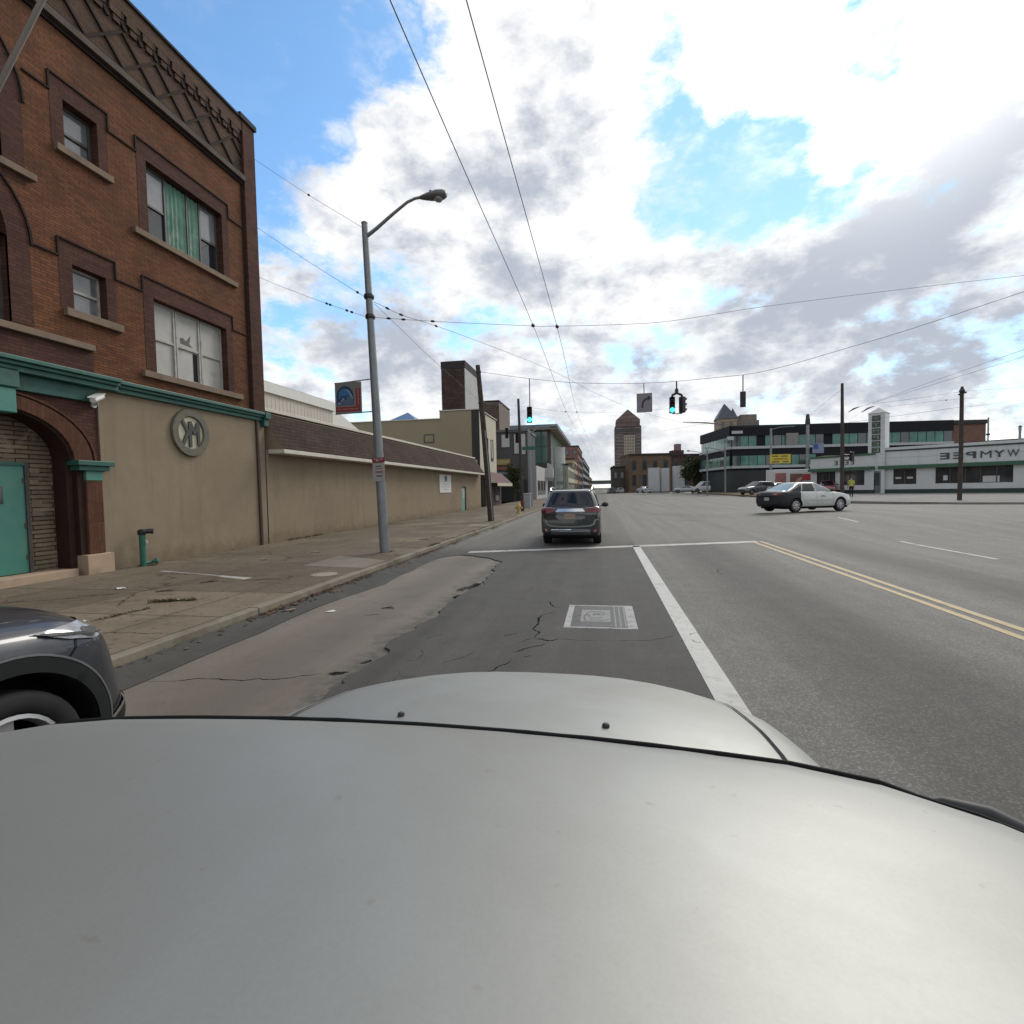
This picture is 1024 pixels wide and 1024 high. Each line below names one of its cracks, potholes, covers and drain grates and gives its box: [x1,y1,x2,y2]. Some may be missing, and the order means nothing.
crack [393,602,597,681]
crack [148,673,320,682]
